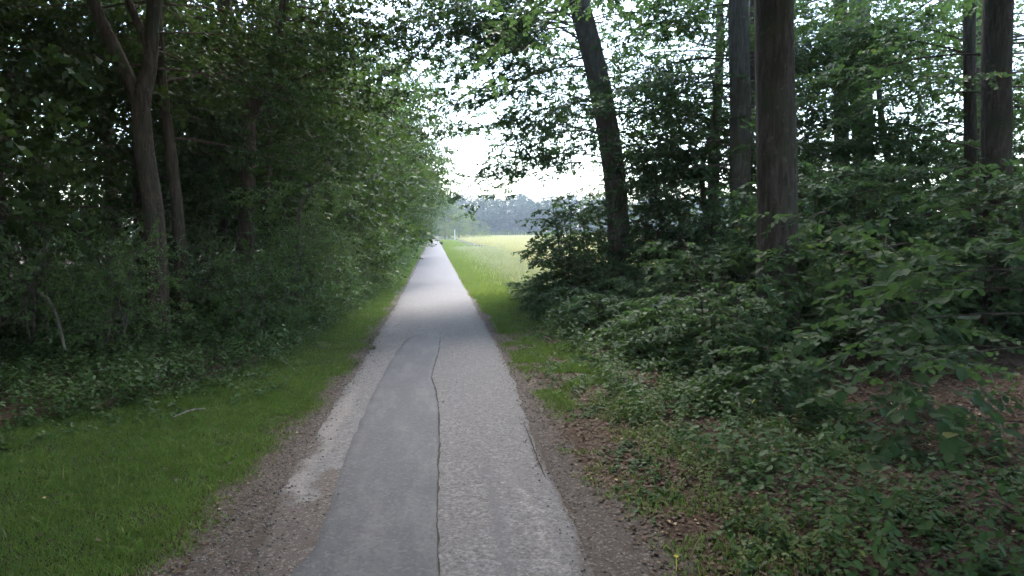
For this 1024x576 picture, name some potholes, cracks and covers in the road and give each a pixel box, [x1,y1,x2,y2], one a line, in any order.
crack [430,336,441,576]
crack [523,423,546,477]
